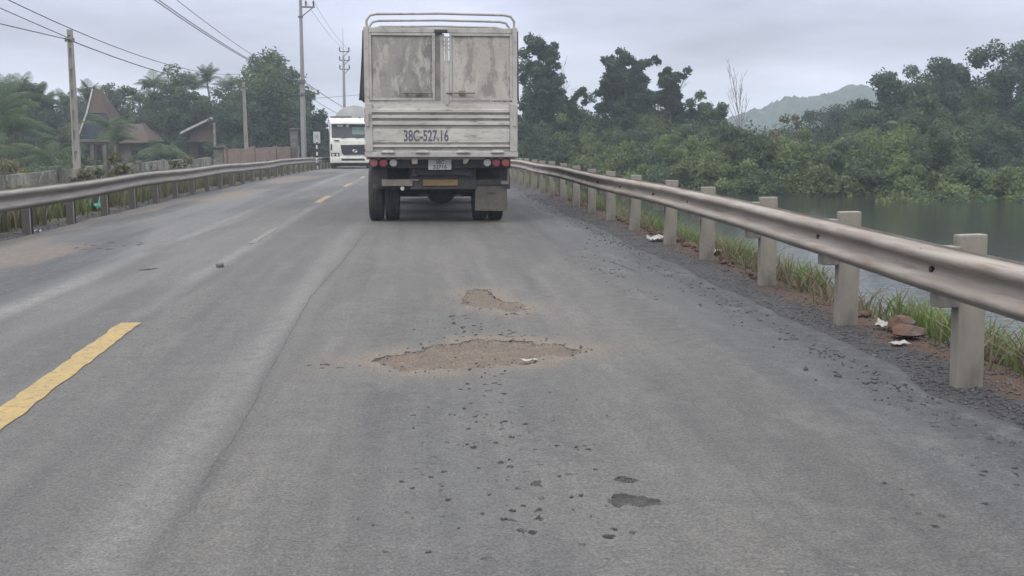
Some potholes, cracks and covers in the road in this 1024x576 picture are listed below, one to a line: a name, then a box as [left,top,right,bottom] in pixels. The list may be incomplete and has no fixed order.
pothole [371,338,582,372]
pothole [460,289,527,313]
crack [198,235,364,489]
